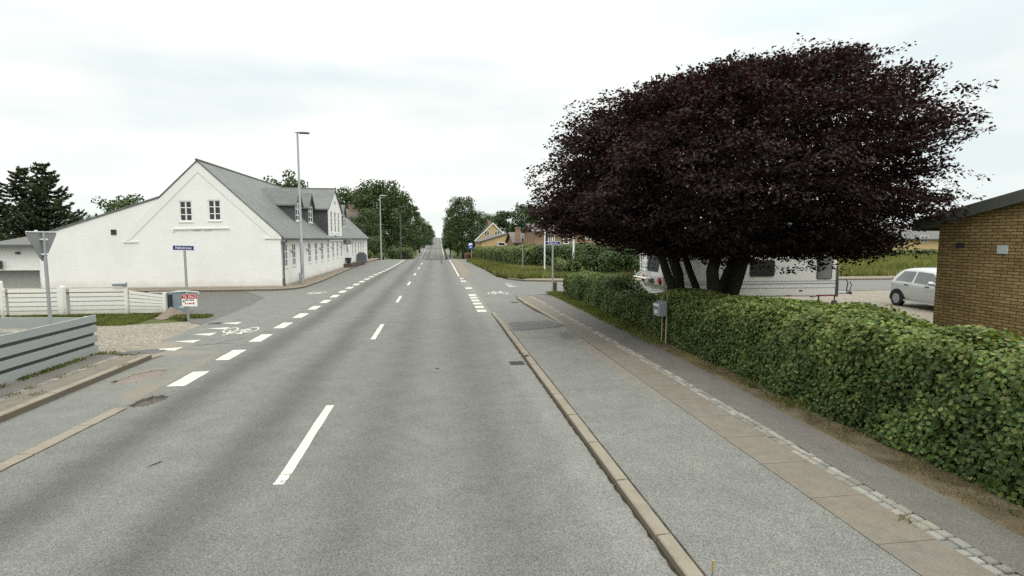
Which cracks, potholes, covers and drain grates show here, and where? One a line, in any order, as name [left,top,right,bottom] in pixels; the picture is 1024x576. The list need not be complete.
pothole [127,395,170,408]
